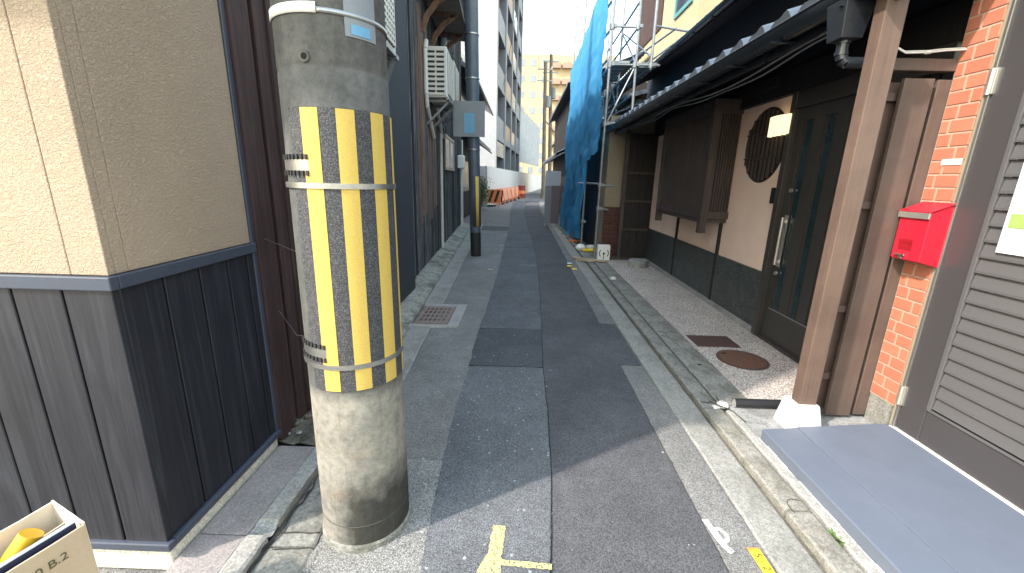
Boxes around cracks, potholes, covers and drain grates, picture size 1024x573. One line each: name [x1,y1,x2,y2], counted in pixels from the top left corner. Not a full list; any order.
drain grate [408,303,468,329]
manhole cover [686,335,741,348]
manhole cover [716,350,770,370]
